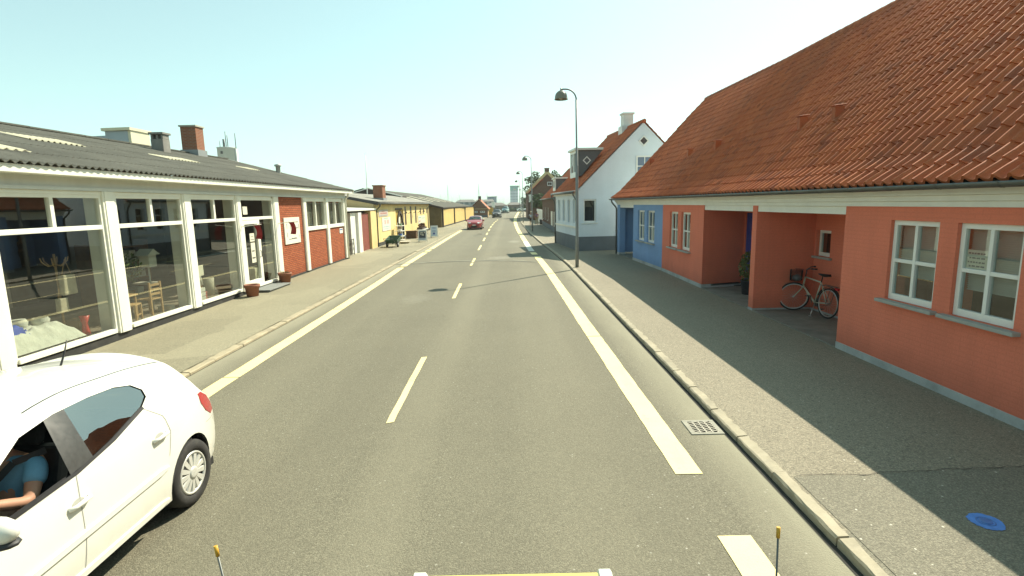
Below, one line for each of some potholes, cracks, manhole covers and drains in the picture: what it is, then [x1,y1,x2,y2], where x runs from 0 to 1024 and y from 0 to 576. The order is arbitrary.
drain grate [681,420,725,435]
manhole cover [966,513,1006,531]
crack [797,465,1024,476]
